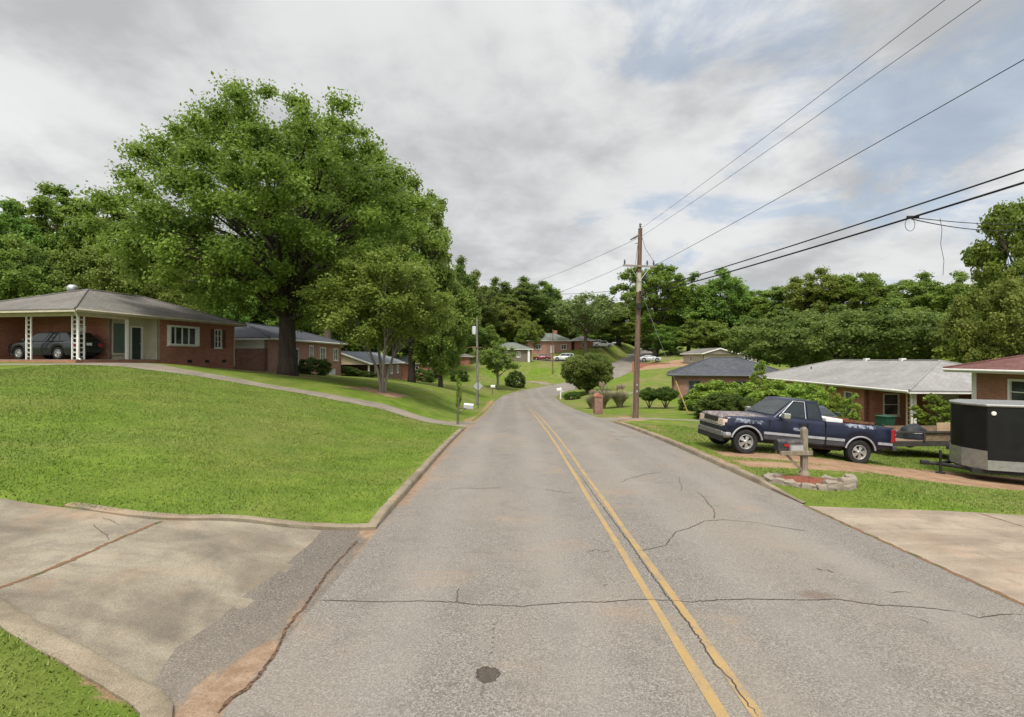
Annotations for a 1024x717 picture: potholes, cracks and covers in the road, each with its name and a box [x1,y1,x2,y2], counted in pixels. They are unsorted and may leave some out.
crack [218,477,1020,714]
